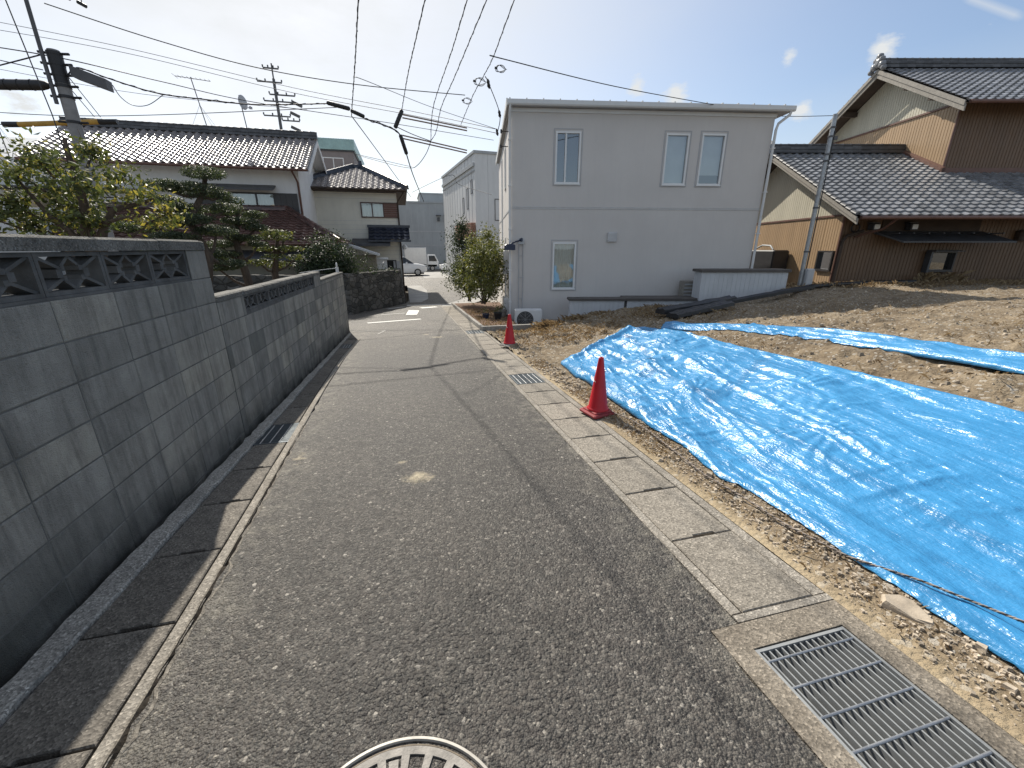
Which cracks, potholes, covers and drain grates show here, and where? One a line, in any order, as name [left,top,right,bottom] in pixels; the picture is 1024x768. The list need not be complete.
drain grate [253,423,299,447]
manhole cover [341,736,488,768]
drain grate [509,373,545,385]
drain grate [755,626,1016,768]
